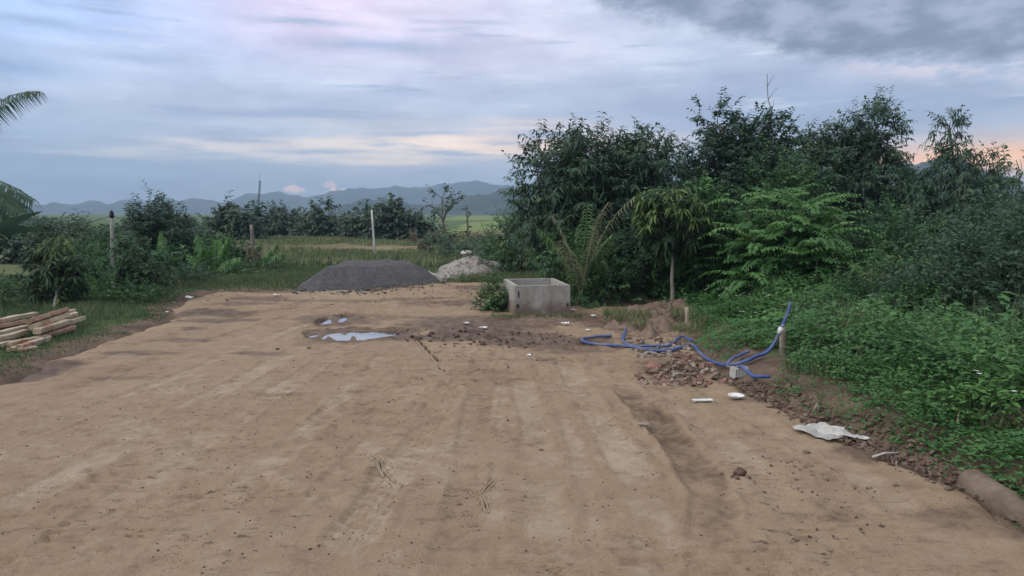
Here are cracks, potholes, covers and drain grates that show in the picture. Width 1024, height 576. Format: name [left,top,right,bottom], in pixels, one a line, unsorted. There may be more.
pothole [308,313,366,327]
pothole [296,326,426,344]
crack [415,339,447,372]
